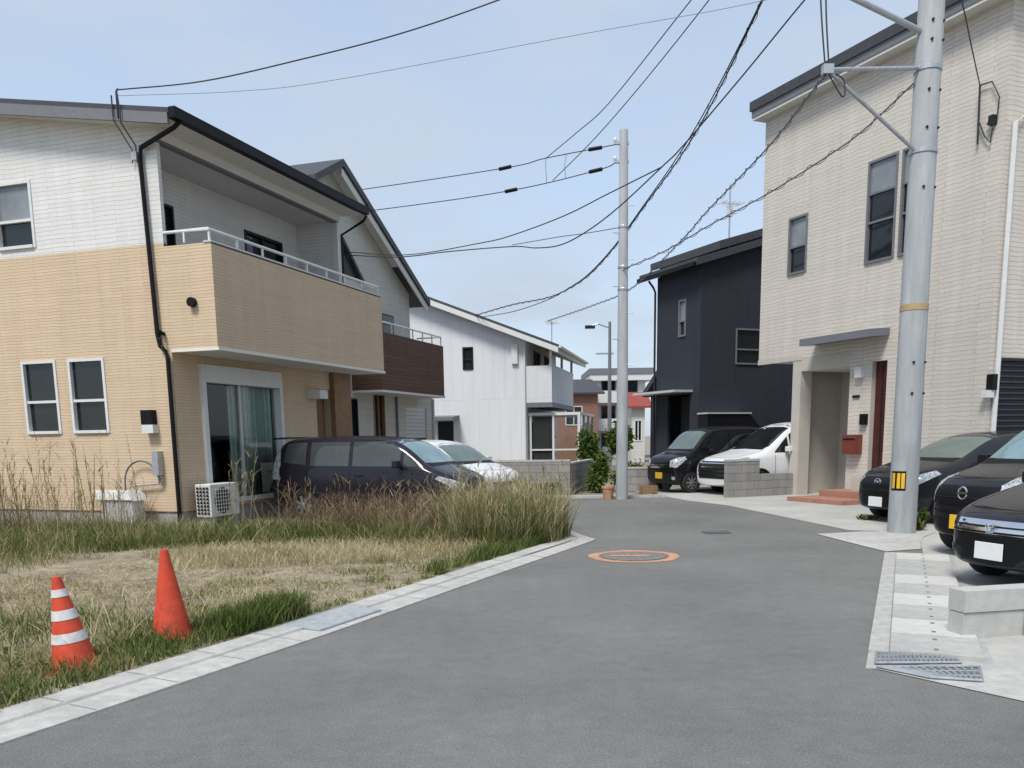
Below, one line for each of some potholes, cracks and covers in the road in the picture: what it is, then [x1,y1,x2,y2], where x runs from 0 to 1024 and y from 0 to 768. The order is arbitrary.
manhole cover [588,550,679,562]
drain grate [876,665,984,682]
drain grate [874,650,962,664]
